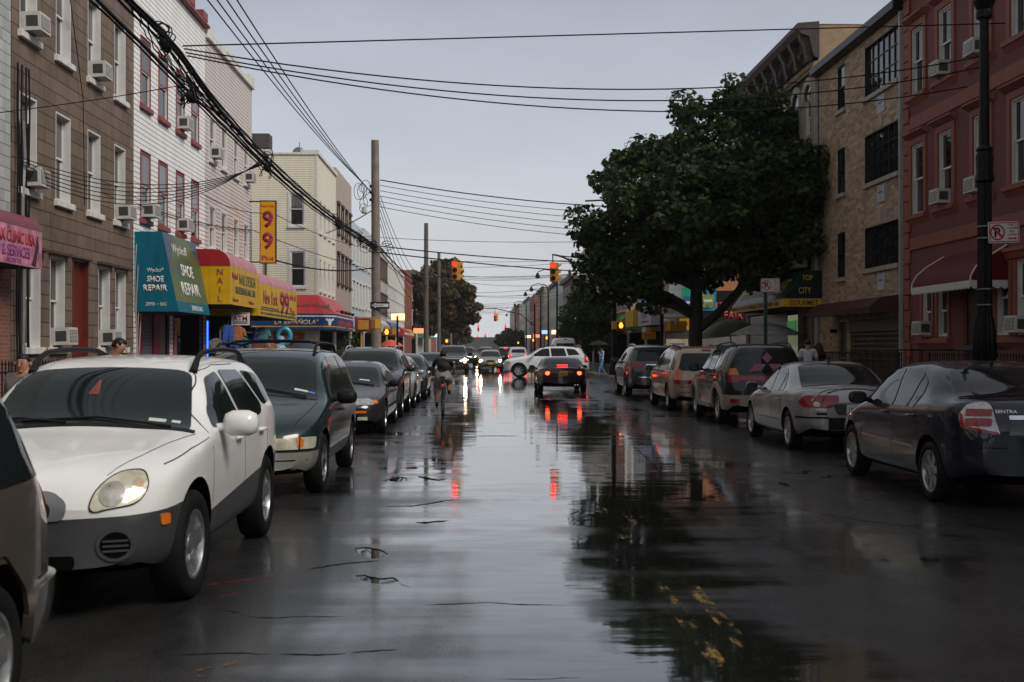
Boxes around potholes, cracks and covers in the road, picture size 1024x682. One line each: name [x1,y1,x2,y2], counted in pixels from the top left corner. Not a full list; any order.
crack [308,560,378,570]
crack [386,499,460,524]
pothole [354,547,388,559]
pothole [356,575,399,584]
